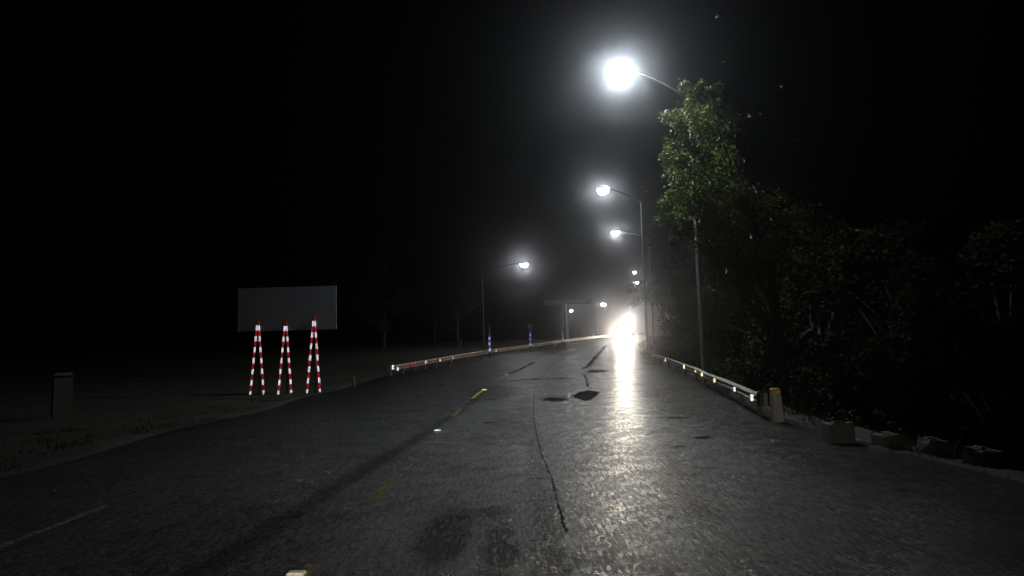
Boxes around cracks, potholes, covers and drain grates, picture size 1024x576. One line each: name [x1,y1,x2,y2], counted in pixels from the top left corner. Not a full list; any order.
crack [505,346,605,534]
pothole [572,390,601,401]
